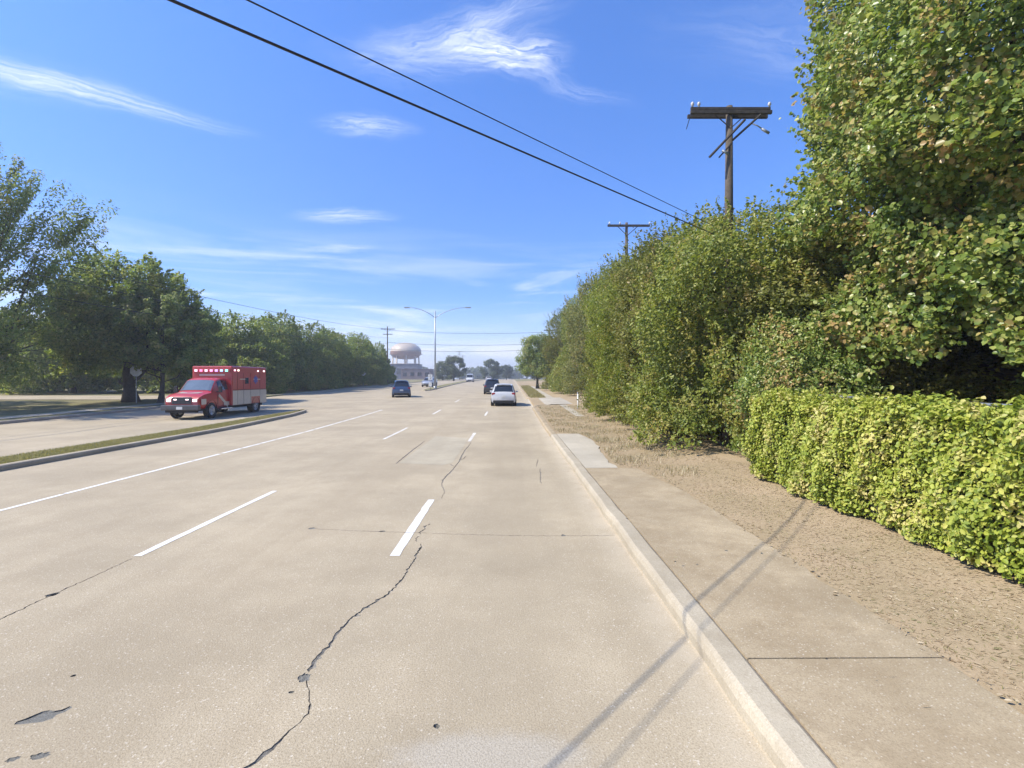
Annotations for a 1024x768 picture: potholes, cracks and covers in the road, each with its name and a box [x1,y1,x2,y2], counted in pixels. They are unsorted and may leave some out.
pothole [14,706,72,725]
crack [243,524,430,768]
crack [441,443,471,496]
